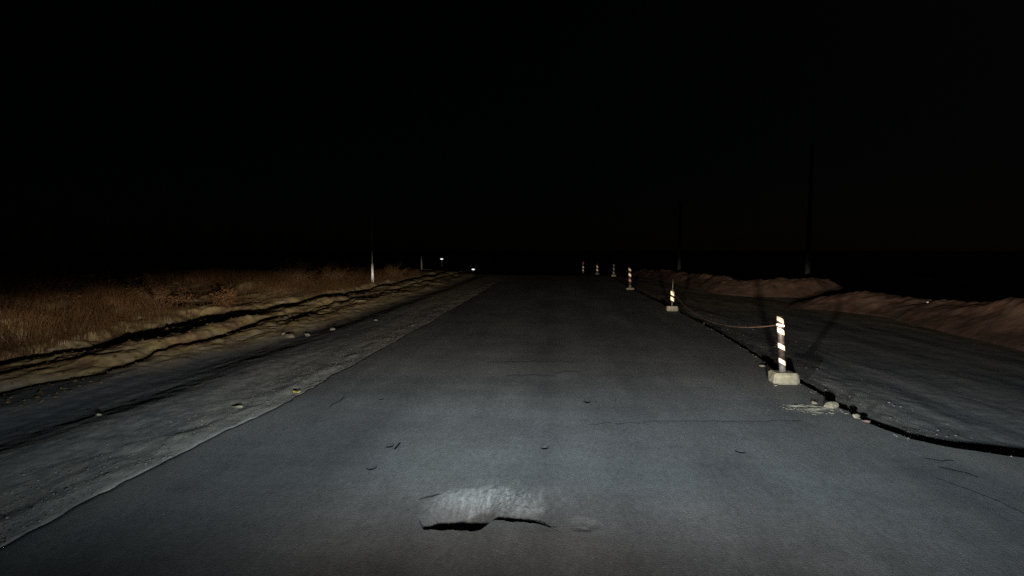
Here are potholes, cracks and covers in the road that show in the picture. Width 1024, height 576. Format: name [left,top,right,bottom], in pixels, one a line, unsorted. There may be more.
pothole [566,516,604,533]
pothole [416,484,558,532]
crack [924,458,1024,514]
